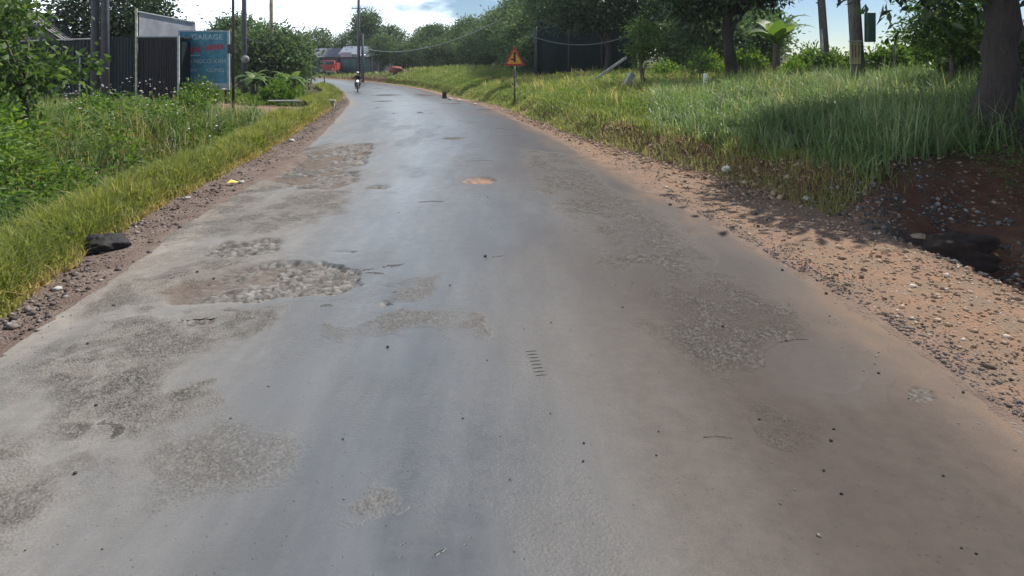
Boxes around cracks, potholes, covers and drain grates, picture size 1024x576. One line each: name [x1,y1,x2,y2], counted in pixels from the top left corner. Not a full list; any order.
pothole [132,254,377,320]
crack [359,264,408,305]
pothole [251,141,397,193]
